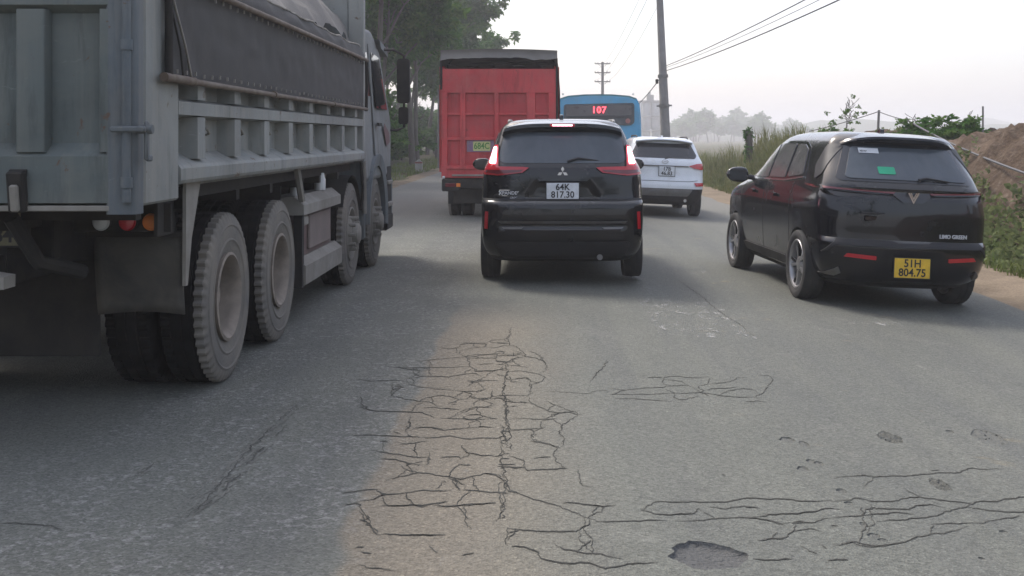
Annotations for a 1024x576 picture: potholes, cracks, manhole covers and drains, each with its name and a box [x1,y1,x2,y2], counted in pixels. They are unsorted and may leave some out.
pothole [971,429,1008,445]
pothole [877,431,903,443]
pothole [668,541,749,570]
crack [134,402,304,525]
pothole [929,478,952,491]
crack [341,329,1024,569]
